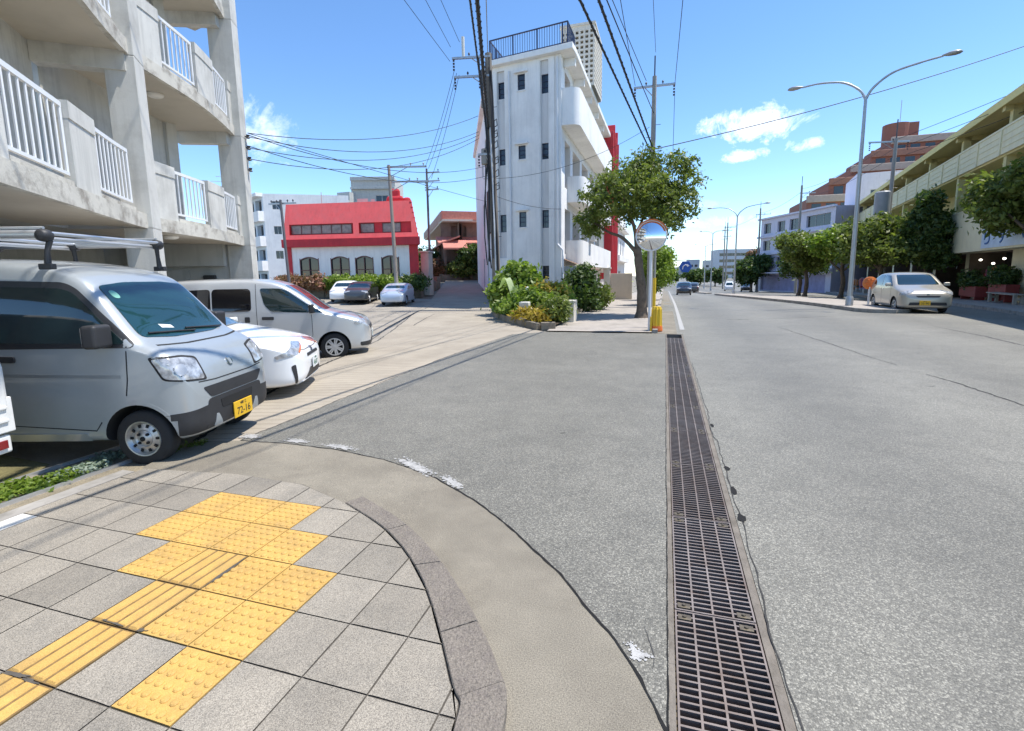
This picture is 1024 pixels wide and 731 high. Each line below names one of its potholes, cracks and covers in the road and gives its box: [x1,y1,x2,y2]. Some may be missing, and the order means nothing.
drain grate [668,364,692,376]
drain grate [672,516,756,624]
drain grate [669,406,706,434]
drain grate [667,356,689,365]
drain grate [668,388,700,408]
drain grate [668,375,695,390]
drain grate [675,610,784,731]
drain grate [670,429,715,467]
drain grate [670,463,730,523]
